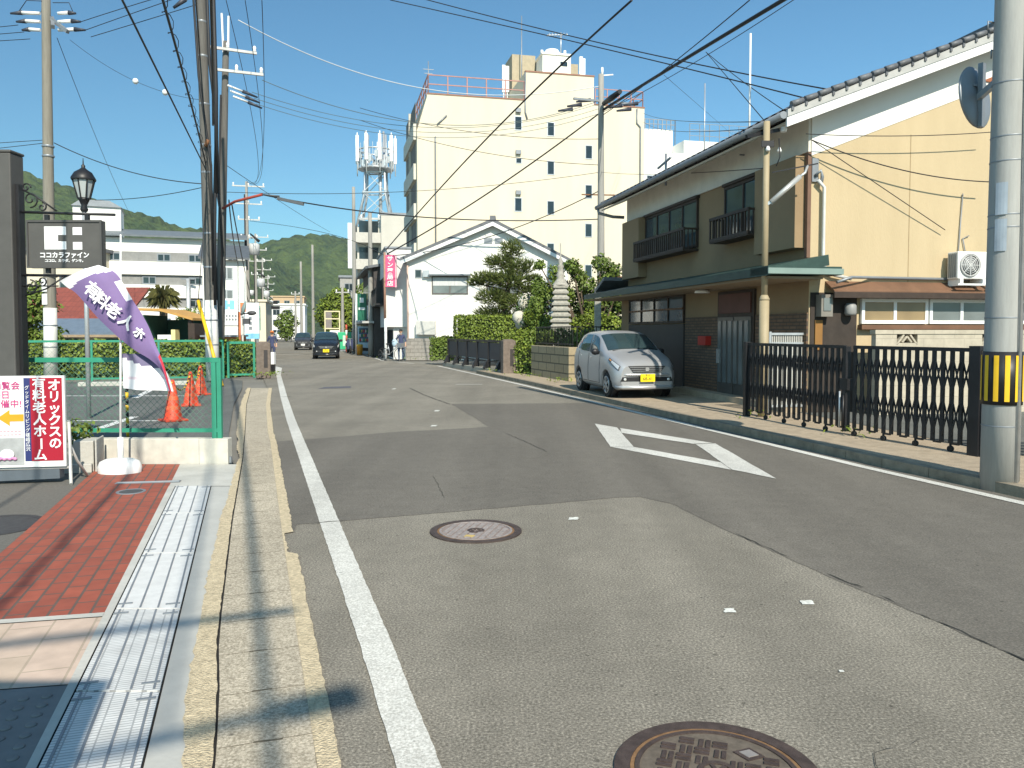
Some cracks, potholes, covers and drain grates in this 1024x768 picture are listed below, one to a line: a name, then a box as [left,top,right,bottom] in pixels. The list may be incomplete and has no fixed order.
manhole cover [614,721,817,768]
manhole cover [430,519,522,544]
